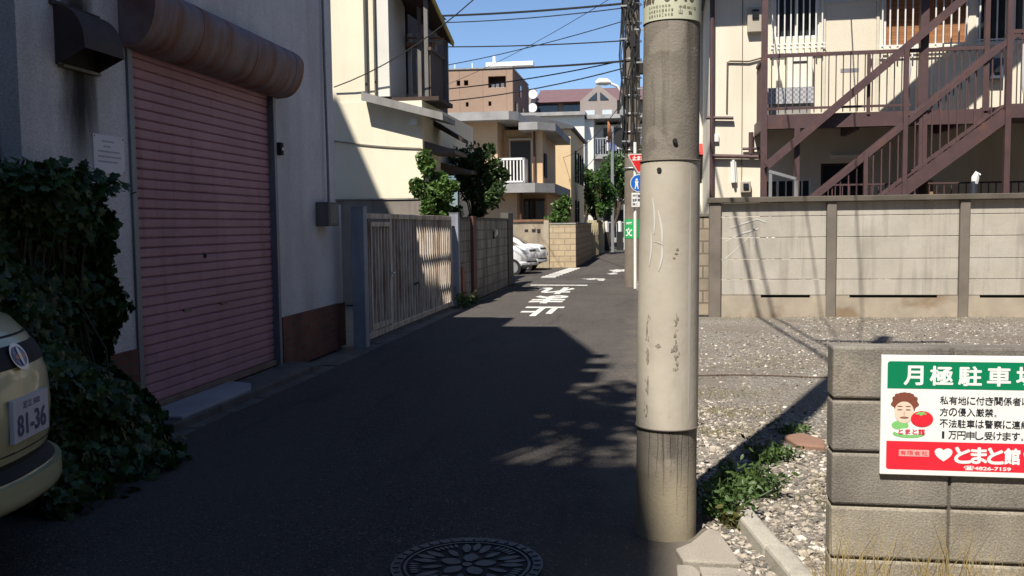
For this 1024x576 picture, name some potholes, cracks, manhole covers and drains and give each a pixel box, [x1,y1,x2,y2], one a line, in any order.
manhole cover [390,537,543,576]
